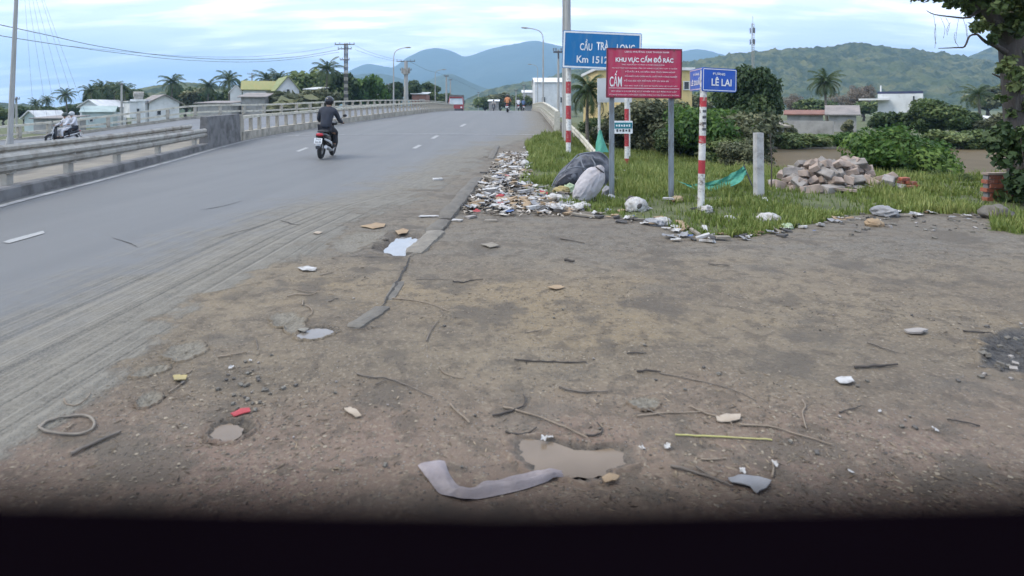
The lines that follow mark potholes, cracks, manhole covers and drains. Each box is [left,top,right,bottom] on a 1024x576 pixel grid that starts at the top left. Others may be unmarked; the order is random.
pothole [357,231,435,260]
pothole [972,325,1024,379]
pothole [292,324,343,342]
pothole [202,414,261,445]
pothole [501,432,649,488]
